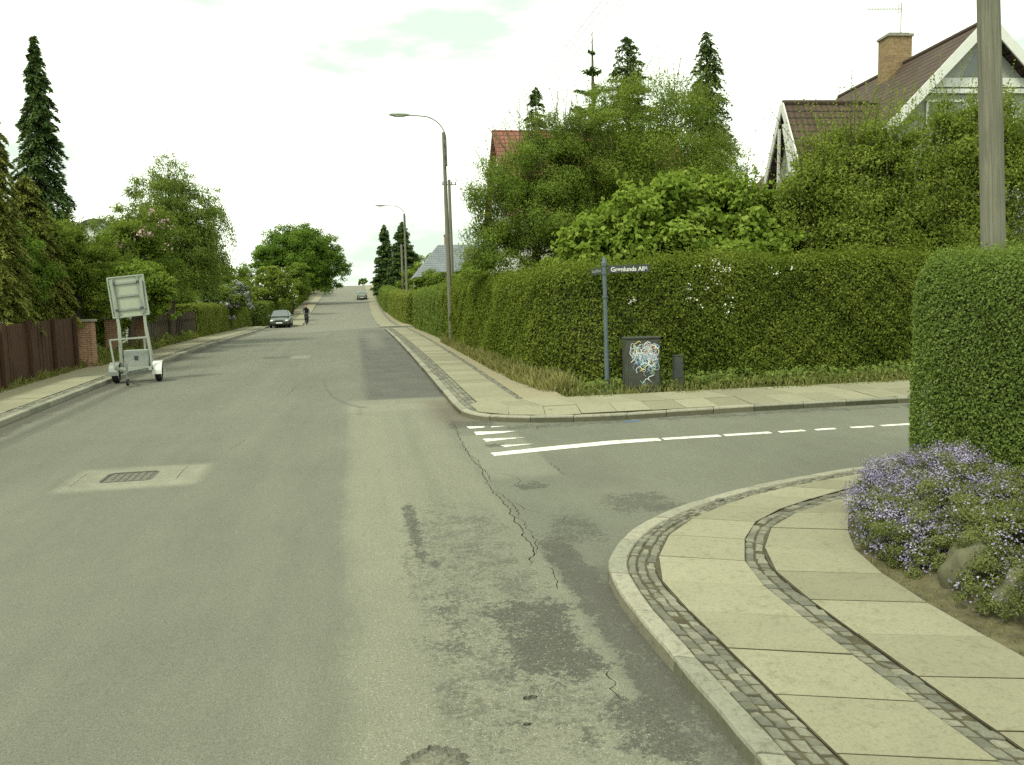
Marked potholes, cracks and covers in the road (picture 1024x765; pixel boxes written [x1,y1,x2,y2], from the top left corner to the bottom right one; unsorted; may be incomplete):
crack [454,424,558,588]
pothole [400,745,471,765]
